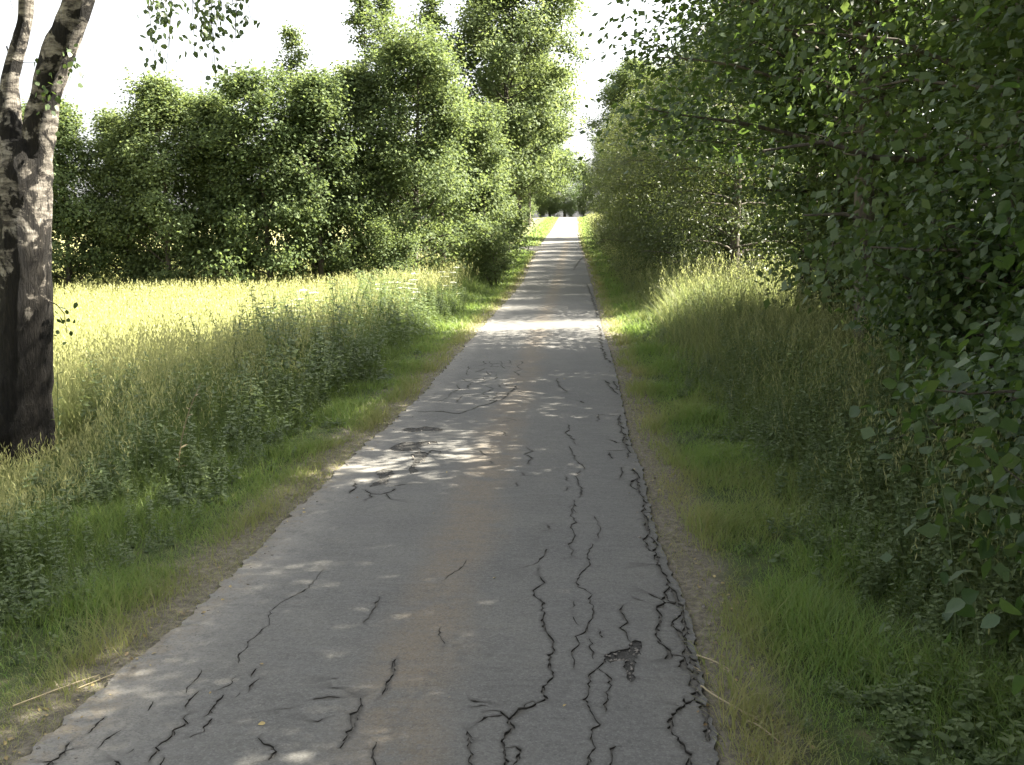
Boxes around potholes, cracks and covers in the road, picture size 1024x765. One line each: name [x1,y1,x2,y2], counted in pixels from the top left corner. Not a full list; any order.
crack [382,659,396,695]
crack [466,415,711,765]
pothole [390,441,437,451]
crack [349,483,405,500]
crack [315,696,377,765]
crack [429,361,523,414]
pothole [604,640,642,682]
crack [45,570,323,765]
